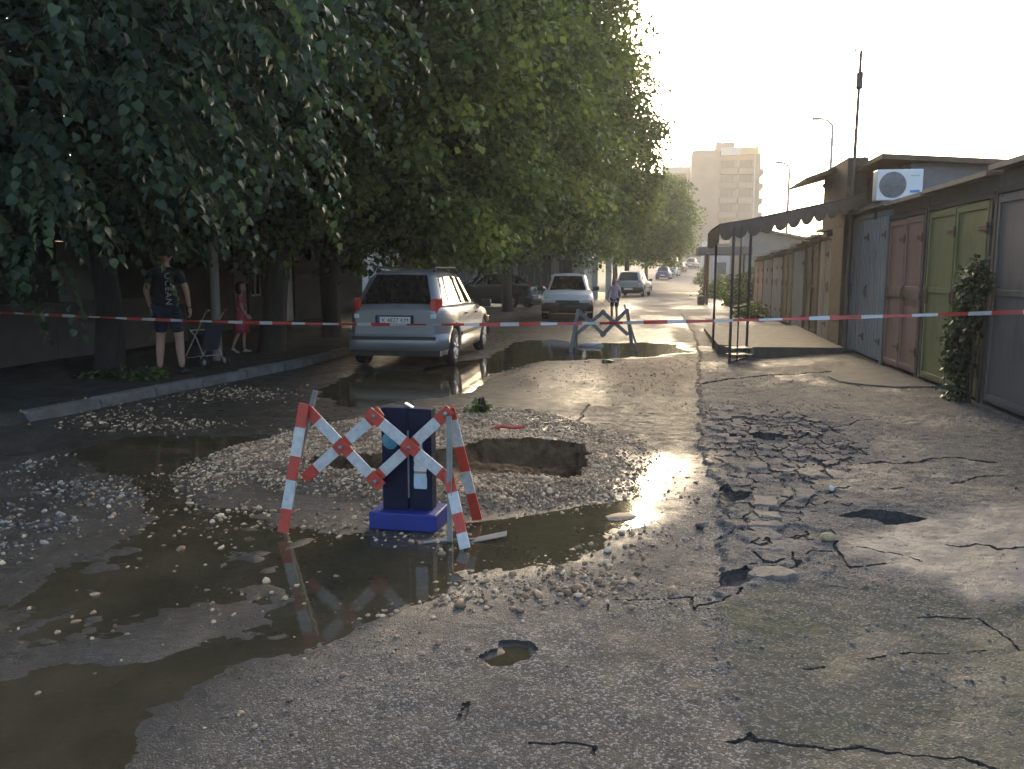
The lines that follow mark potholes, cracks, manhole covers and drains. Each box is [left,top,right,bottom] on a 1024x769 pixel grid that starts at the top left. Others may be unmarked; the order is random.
crack [725,732,997,769]
pothole [309,437,592,478]
crack [702,409,1009,606]
pothole [838,509,927,525]
pothole [479,640,538,666]
crack [945,543,1024,551]
